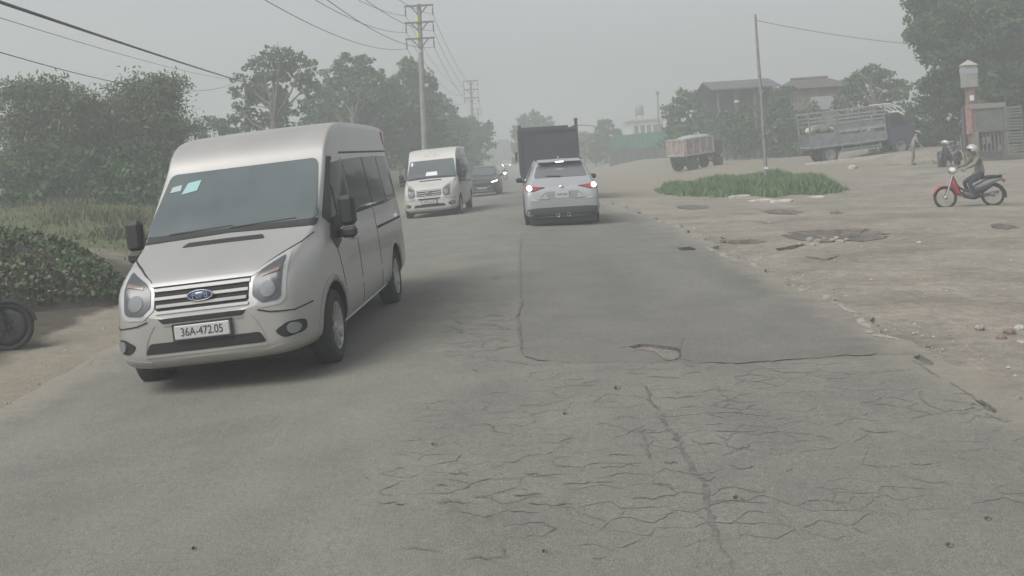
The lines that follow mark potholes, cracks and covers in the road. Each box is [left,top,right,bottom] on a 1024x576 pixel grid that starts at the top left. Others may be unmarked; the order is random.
pothole [629,344,681,360]
pothole [780,228,890,242]
crack [366,274,1024,569]
